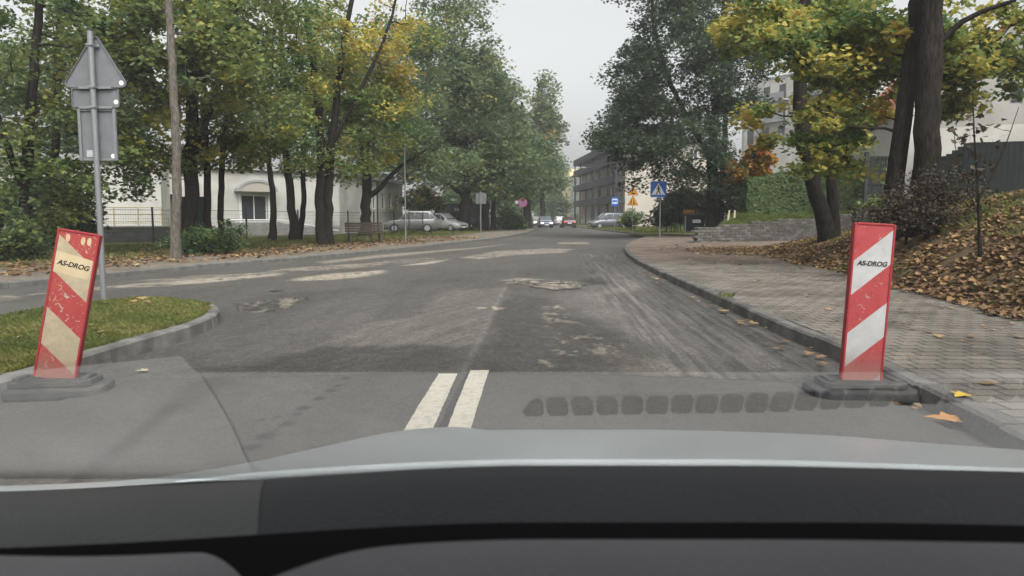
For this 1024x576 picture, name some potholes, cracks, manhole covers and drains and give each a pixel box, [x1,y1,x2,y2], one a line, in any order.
pothole [224,295,317,315]
pothole [513,279,586,290]
